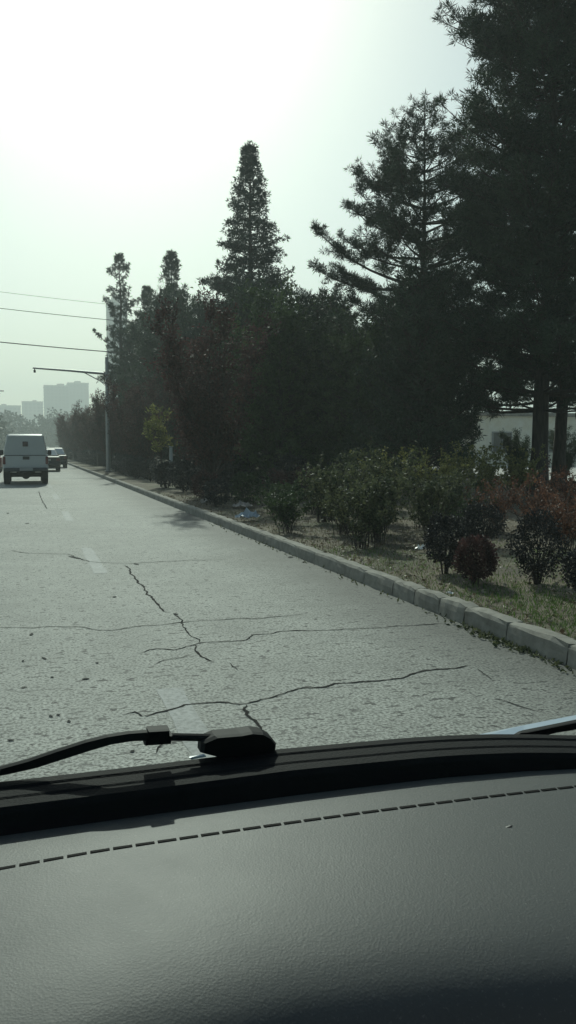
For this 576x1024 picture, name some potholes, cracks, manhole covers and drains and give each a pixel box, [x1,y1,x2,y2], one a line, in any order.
crack [21,614,440,669]
crack [126,665,468,729]
